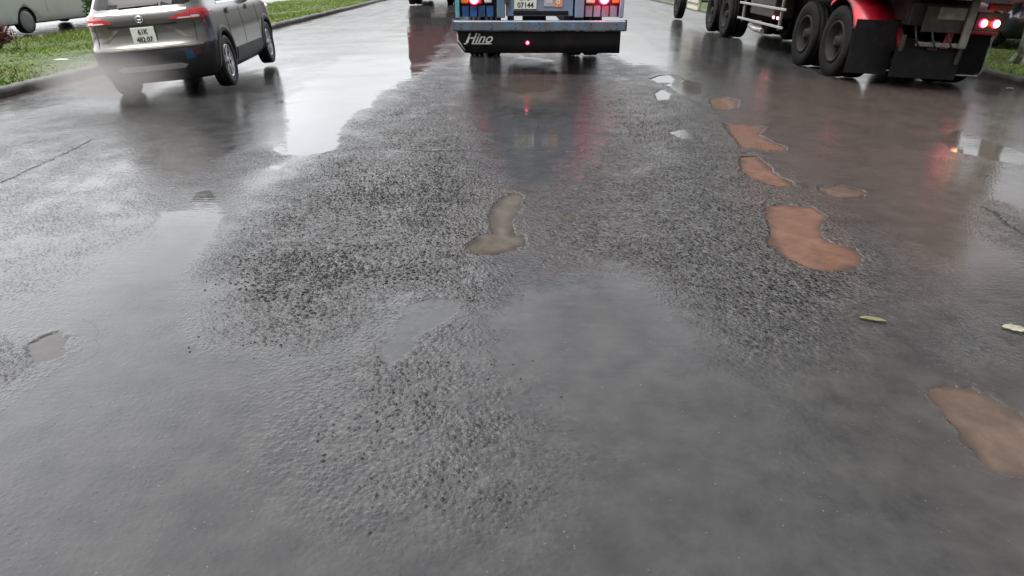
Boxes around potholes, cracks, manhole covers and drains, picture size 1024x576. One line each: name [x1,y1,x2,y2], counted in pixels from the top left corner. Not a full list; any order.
pothole [724,148,811,192]
pothole [642,74,693,84]
pothole [745,198,887,282]
pothole [656,126,707,142]
pothole [711,121,802,157]
pothole [644,88,680,102]
pothole [445,186,547,264]
pothole [800,180,885,204]
pothole [890,364,1024,501]
pothole [699,95,749,112]
crack [2,140,91,182]
